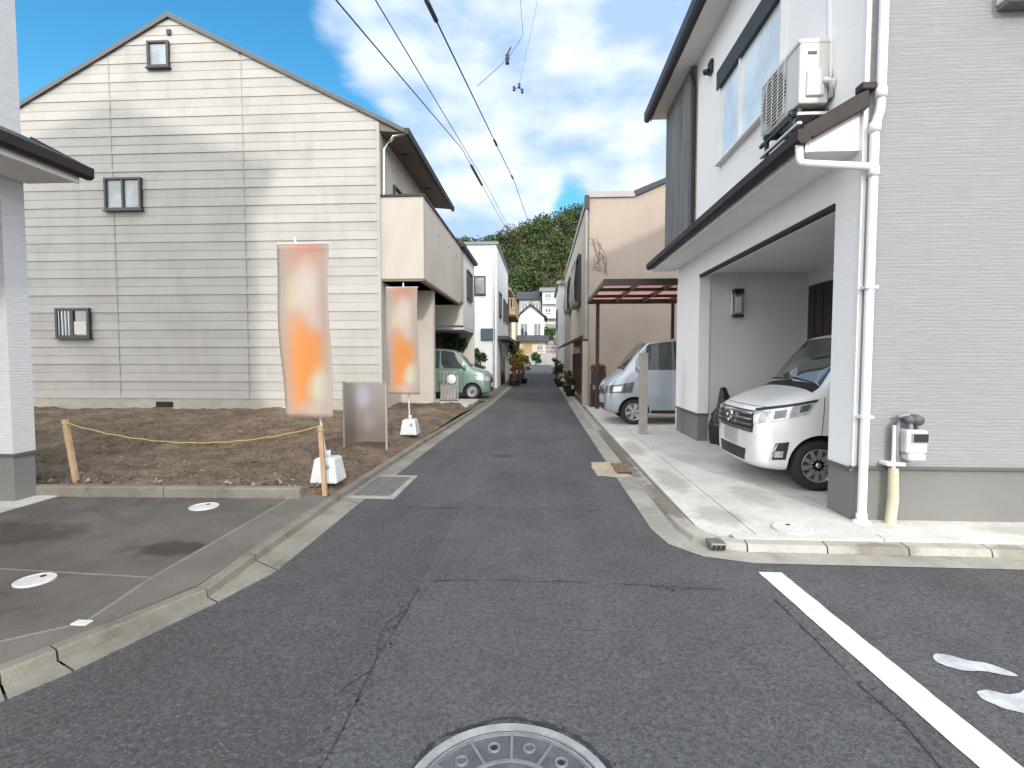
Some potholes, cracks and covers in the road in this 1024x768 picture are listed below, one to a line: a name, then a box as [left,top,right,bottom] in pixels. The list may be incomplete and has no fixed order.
drain grate [706,538,726,550]
manhole cover [414,723,606,768]
manhole cover [11,572,58,588]
manhole cover [772,522,814,535]
crack [316,578,588,768]
drain grate [350,475,418,499]
manhole cover [188,502,219,511]
